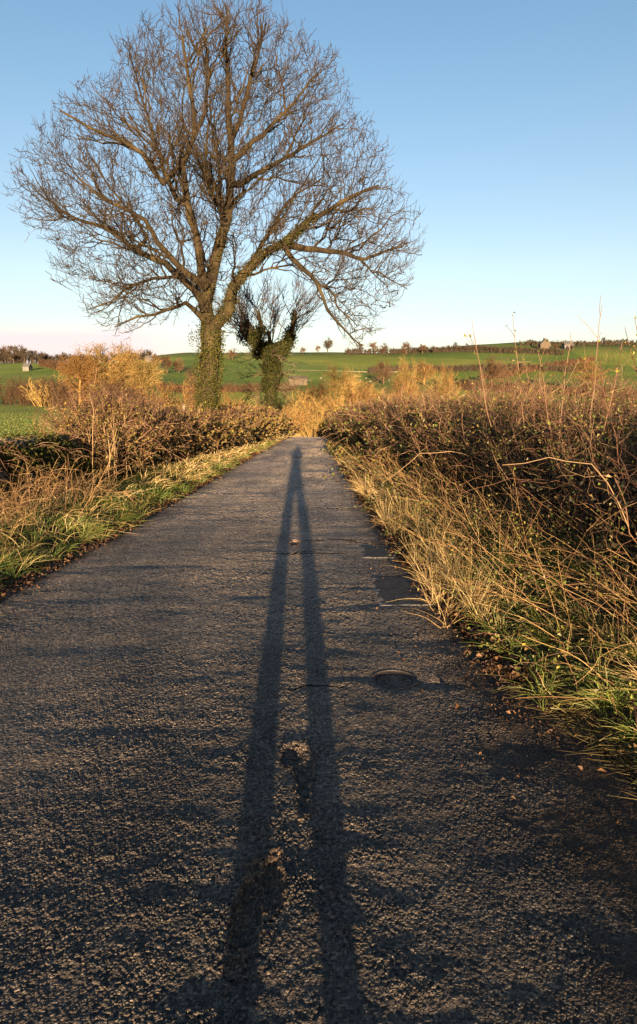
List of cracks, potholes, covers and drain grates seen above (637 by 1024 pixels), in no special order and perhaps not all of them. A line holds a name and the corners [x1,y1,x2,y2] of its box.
crack [271,539,389,555]
manhole cover [371,670,418,689]
